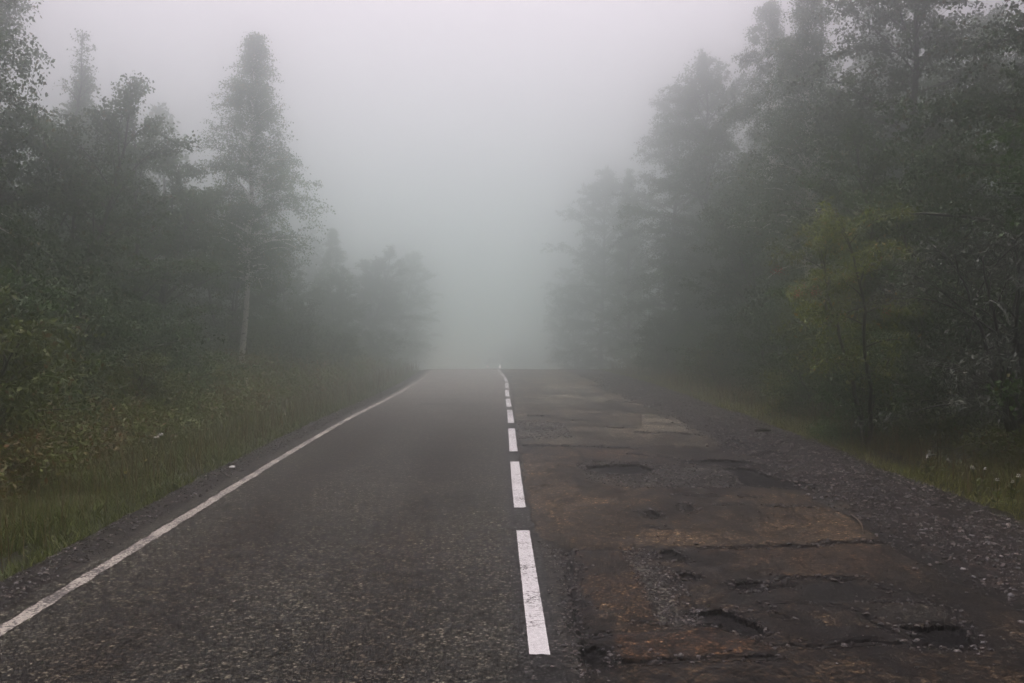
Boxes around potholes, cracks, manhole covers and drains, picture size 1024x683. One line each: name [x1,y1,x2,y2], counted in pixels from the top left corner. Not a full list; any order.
pothole [681,459,765,467]
pothole [652,549,692,563]
crack [691,538,891,550]
crack [558,550,973,667]
pothole [689,607,775,640]
pothole [891,622,987,652]
pothole [638,509,668,519]
pothole [580,463,658,476]
pothole [718,467,826,491]
